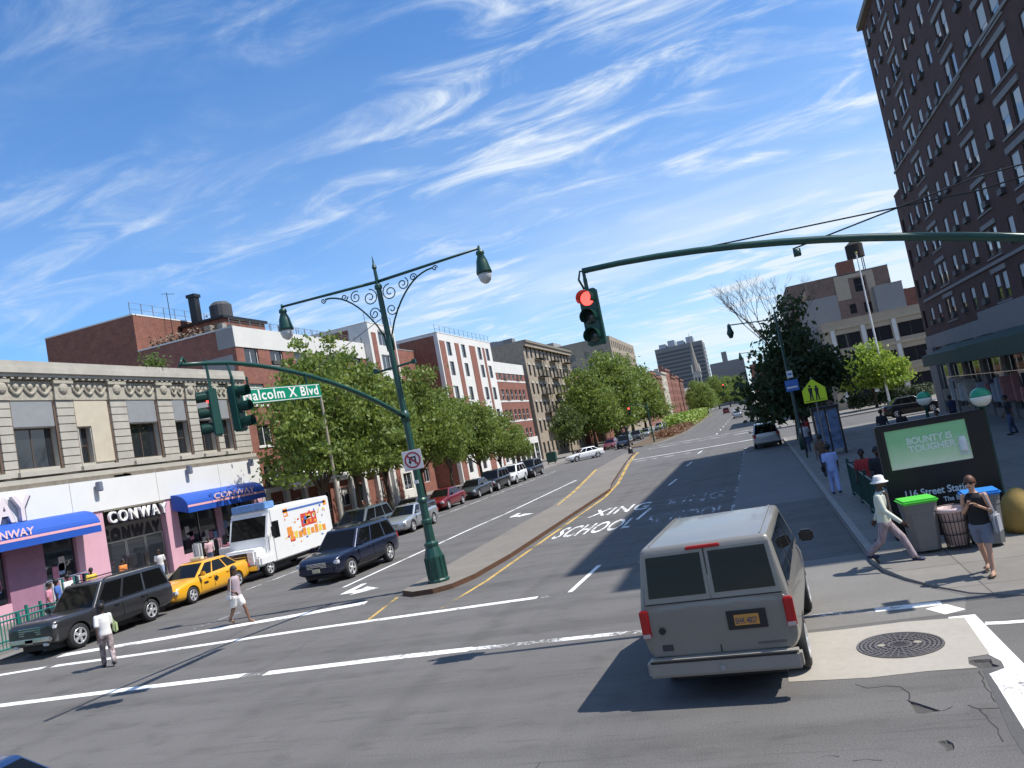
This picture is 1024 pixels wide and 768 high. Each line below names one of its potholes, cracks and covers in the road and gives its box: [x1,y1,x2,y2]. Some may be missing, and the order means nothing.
manhole cover [856,632,945,658]
pothole [968,659,998,669]
crack [969,670,1004,742]
pothole [938,740,954,752]
